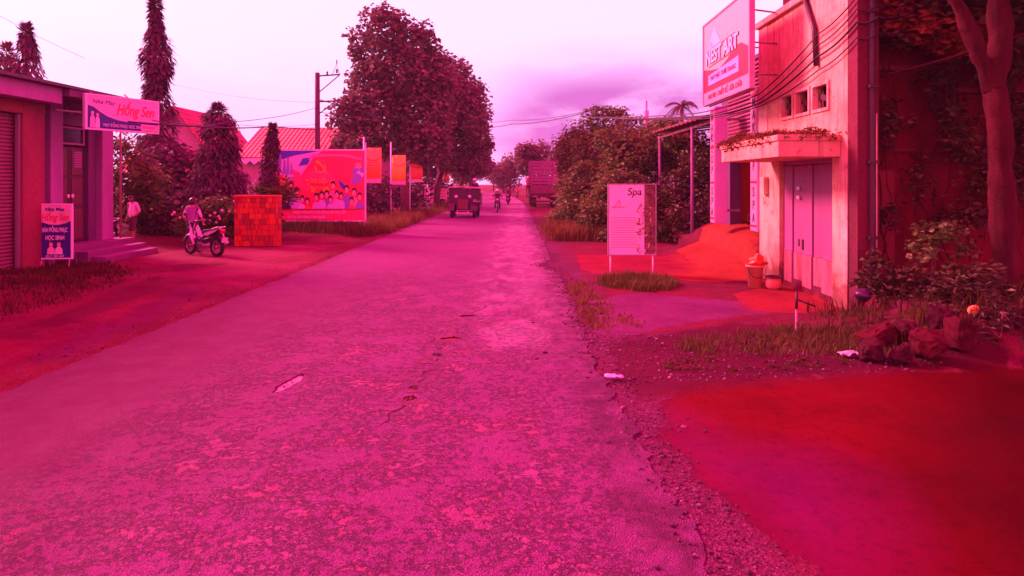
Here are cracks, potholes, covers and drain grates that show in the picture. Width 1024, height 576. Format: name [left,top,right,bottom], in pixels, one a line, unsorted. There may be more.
crack [375,305,487,429]
pothole [272,372,304,393]
